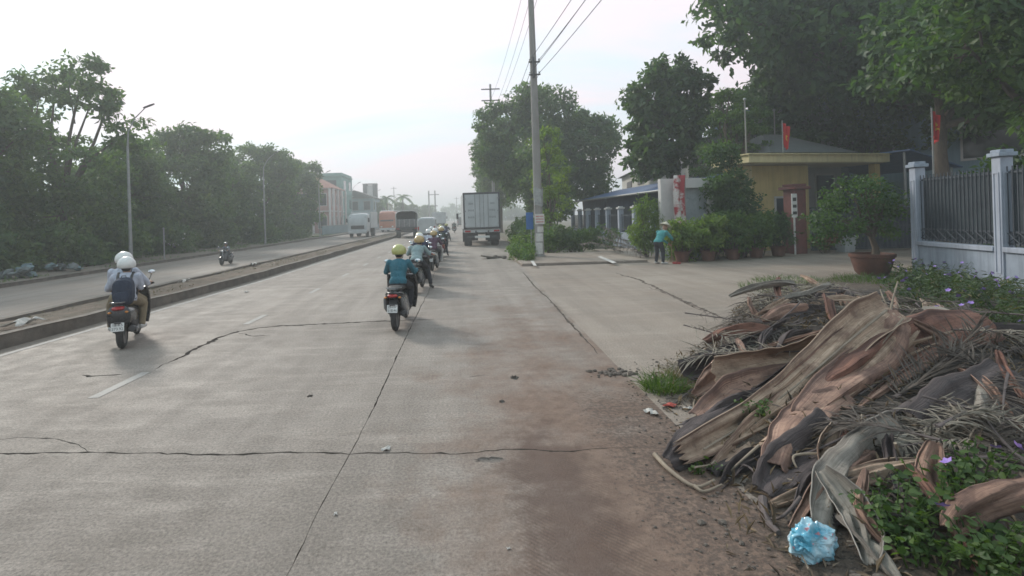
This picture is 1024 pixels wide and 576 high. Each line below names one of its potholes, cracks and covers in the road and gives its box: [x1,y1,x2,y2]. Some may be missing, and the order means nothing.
crack [617,273,730,321]
crack [156,319,419,369]
crack [0,437,638,456]
